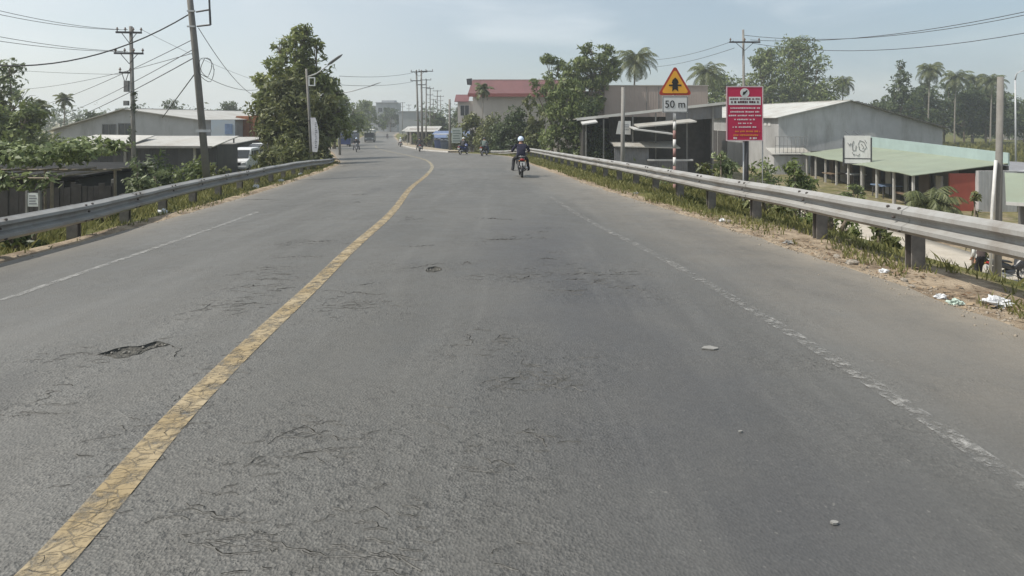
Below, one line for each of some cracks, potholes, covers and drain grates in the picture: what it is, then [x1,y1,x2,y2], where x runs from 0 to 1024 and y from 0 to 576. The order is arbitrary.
crack [175,240,400,320]
crack [463,218,640,295]
crack [0,341,442,576]
crack [429,405,580,572]
pothole [98,341,170,358]
crack [447,329,598,391]
